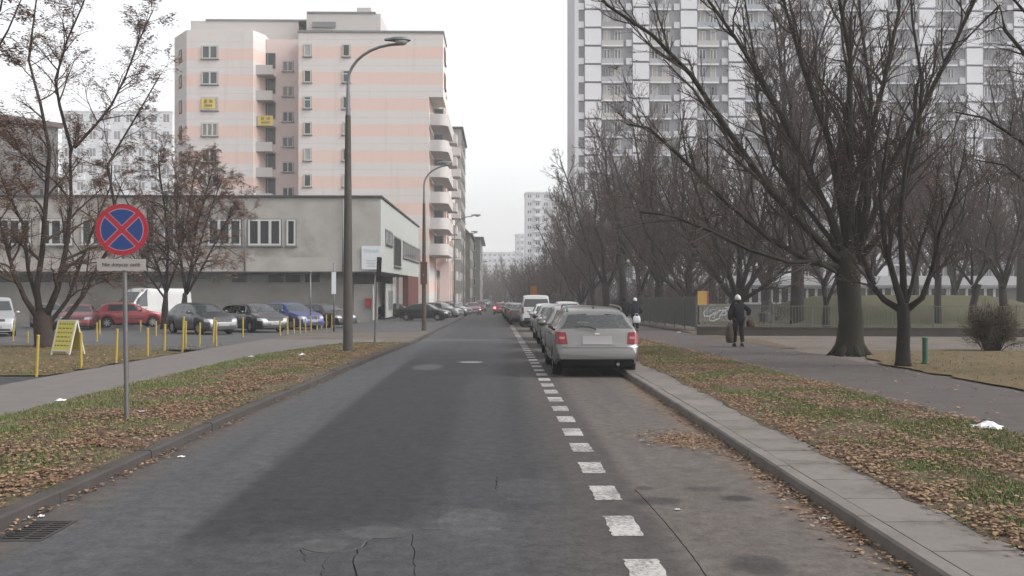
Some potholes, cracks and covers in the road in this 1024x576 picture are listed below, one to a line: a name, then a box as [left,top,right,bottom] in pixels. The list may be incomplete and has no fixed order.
crack [287,529,440,576]
drain grate [0,520,78,542]
